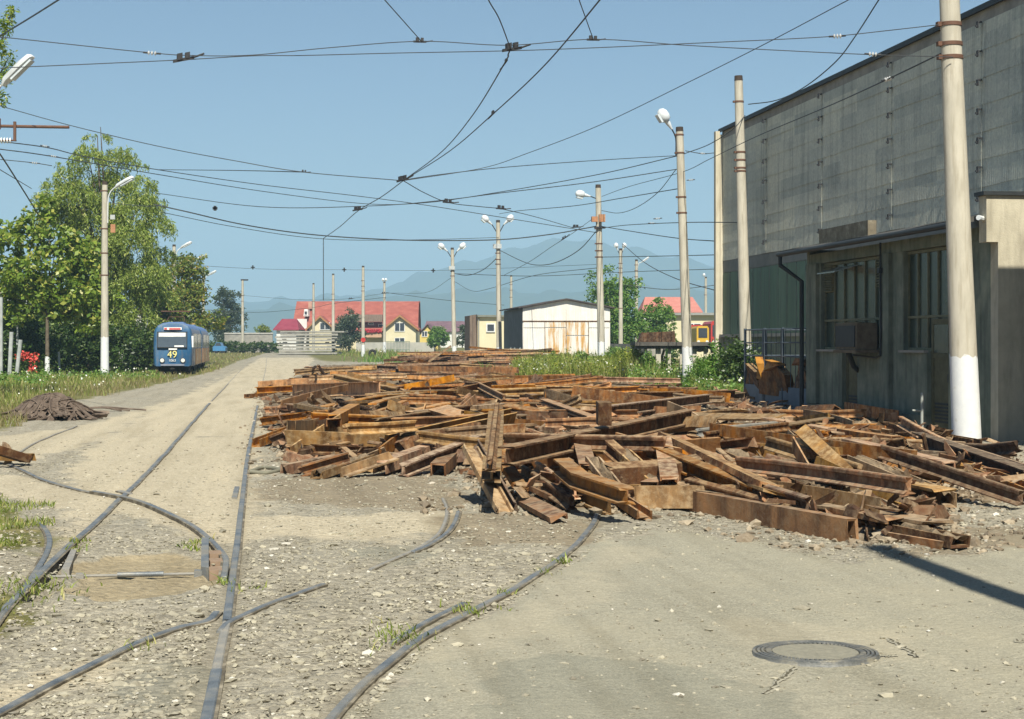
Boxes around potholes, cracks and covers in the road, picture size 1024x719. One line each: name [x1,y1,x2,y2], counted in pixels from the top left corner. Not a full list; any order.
crack [880,638,919,657]
crack [762,666,798,694]
manhole cover [752,640,881,668]
